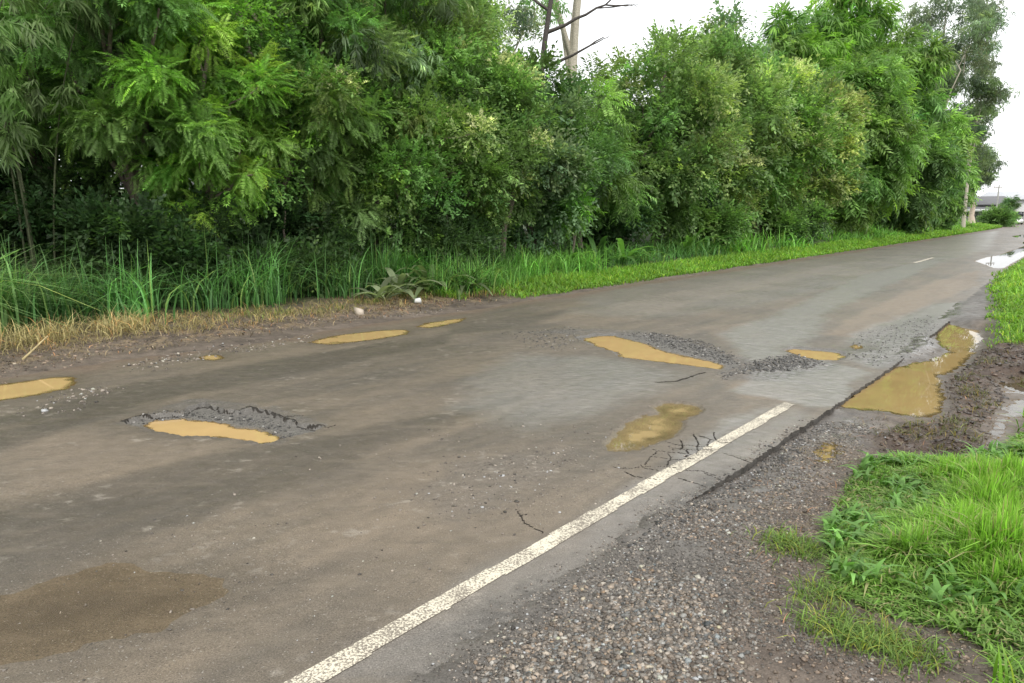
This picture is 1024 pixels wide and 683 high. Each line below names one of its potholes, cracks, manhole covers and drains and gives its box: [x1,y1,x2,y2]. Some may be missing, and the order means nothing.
pothole [575,333,742,371]
pothole [835,320,992,420]
crack [614,432,751,489]
crack [656,372,706,383]
pothole [125,402,324,444]
pothole [599,400,706,452]
pothole [781,346,850,361]
